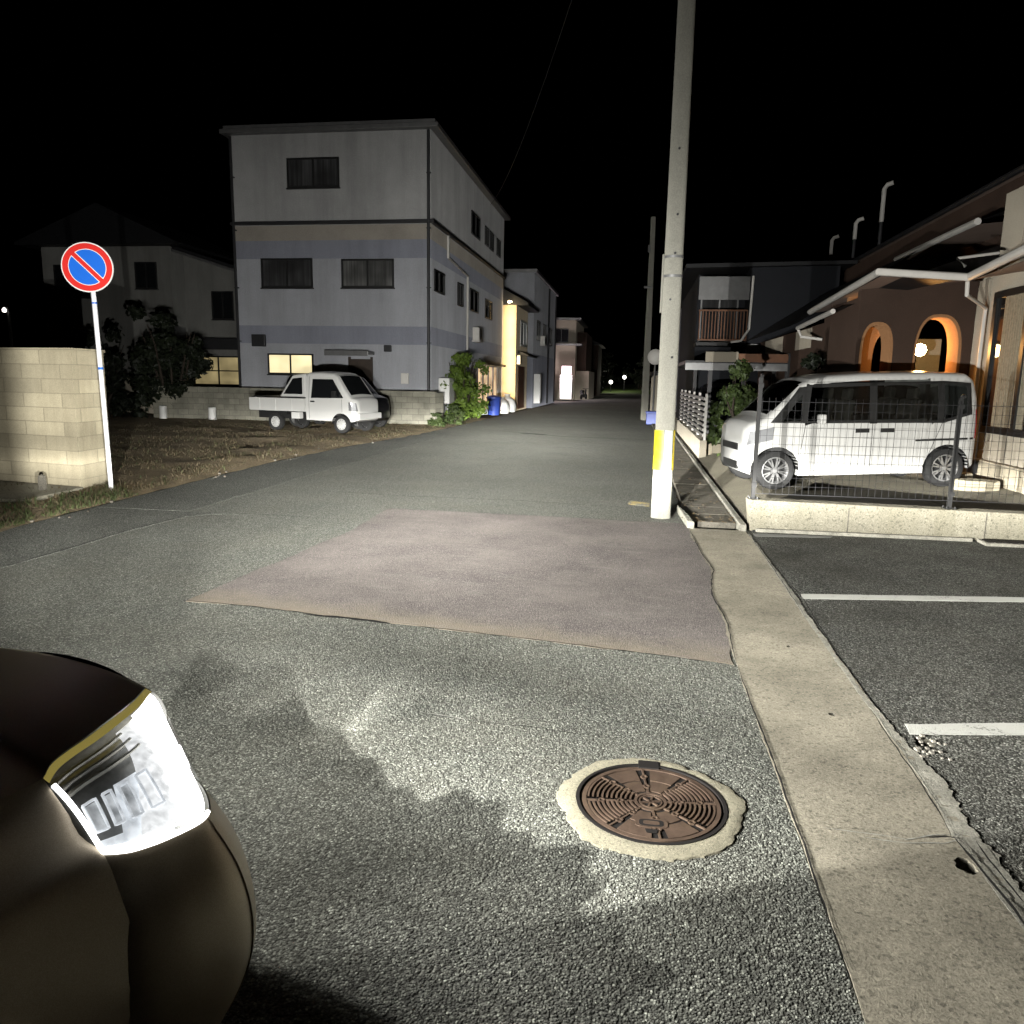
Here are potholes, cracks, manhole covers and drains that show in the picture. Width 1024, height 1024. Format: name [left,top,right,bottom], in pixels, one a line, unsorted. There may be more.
manhole cover [556,758,747,862]
pothole [955,857,978,875]
